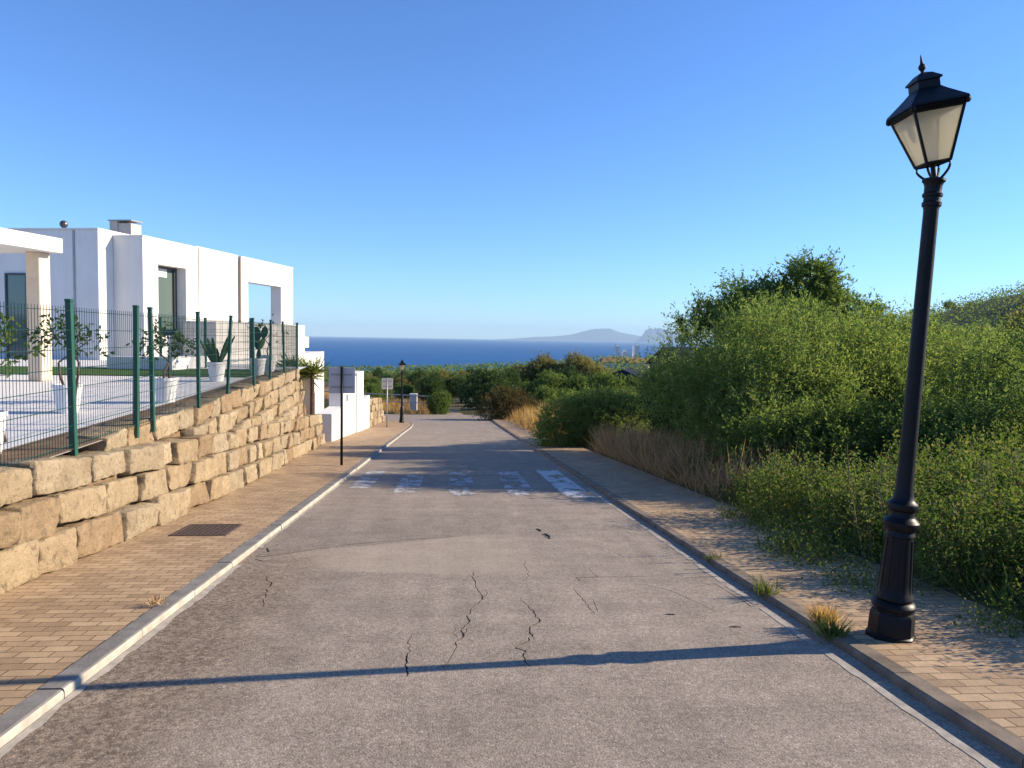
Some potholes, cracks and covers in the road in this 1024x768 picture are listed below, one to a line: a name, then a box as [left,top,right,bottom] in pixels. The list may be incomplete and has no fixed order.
crack [576,570,770,614]
crack [246,544,278,605]
crack [508,599,541,667]
crack [443,572,488,668]
